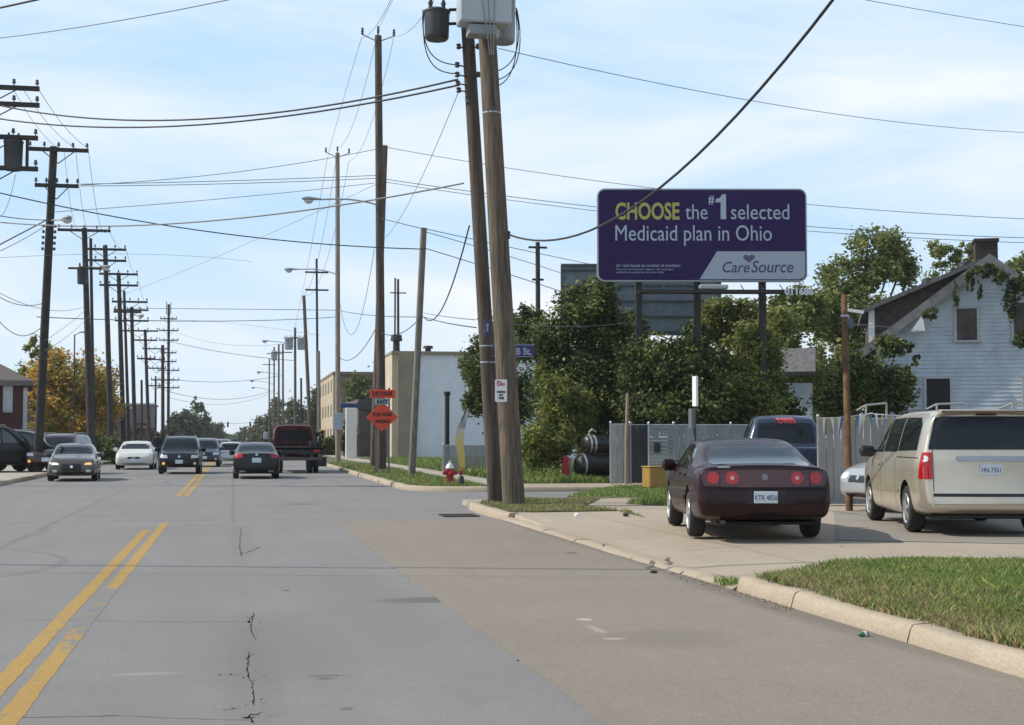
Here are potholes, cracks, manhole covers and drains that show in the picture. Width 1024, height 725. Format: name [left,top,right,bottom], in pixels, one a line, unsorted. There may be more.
crack [25,613,272,724]
